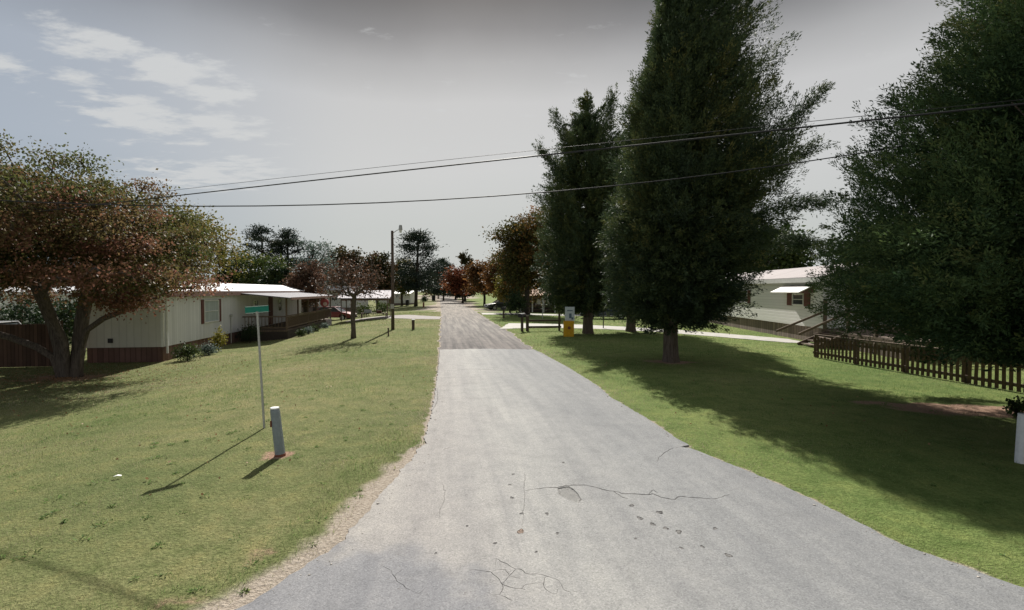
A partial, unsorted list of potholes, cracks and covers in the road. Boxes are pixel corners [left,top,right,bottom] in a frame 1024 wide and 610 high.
pothole [557,486,582,503]
crack [523,475,727,515]
crack [473,559,580,600]
